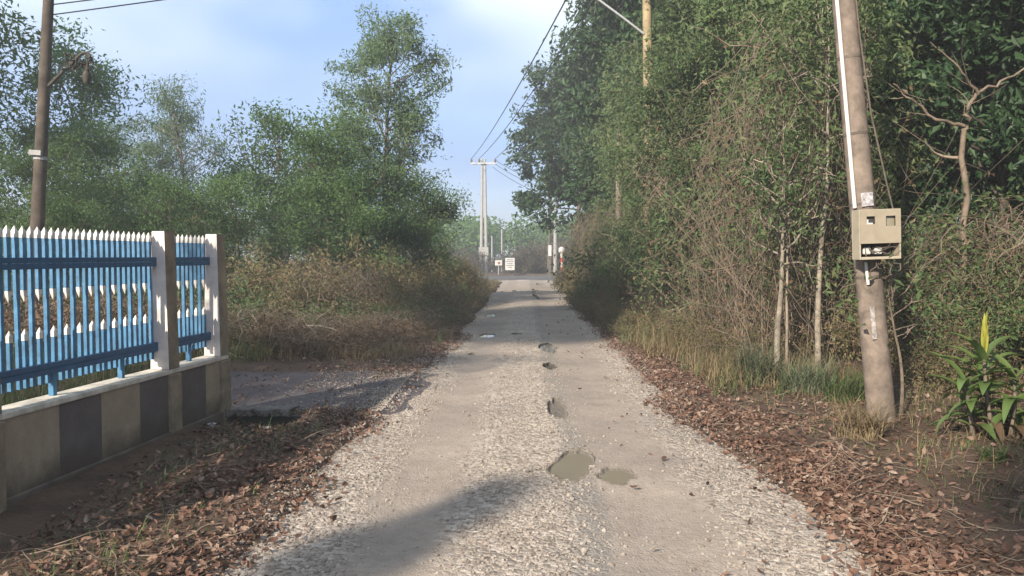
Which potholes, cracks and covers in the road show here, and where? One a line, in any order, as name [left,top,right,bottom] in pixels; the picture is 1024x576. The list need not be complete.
pothole [546,396,568,420]
pothole [593,466,639,486]
pothole [537,342,559,354]
pothole [544,447,596,484]
